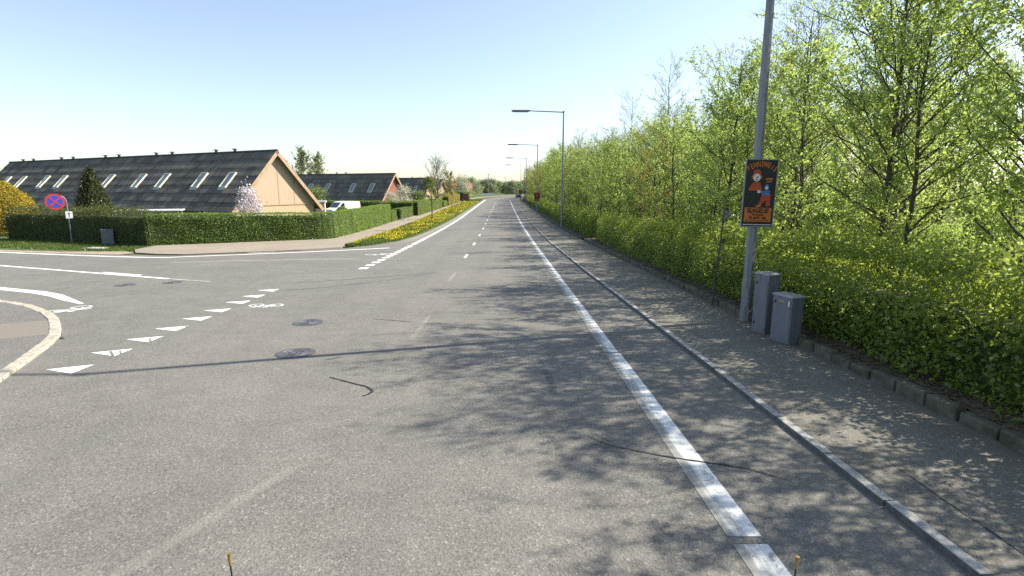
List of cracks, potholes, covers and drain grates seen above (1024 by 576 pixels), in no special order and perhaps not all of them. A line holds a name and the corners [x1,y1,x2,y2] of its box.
manhole cover [274,348,316,359]
crack [590,432,790,480]
crack [331,377,374,396]
